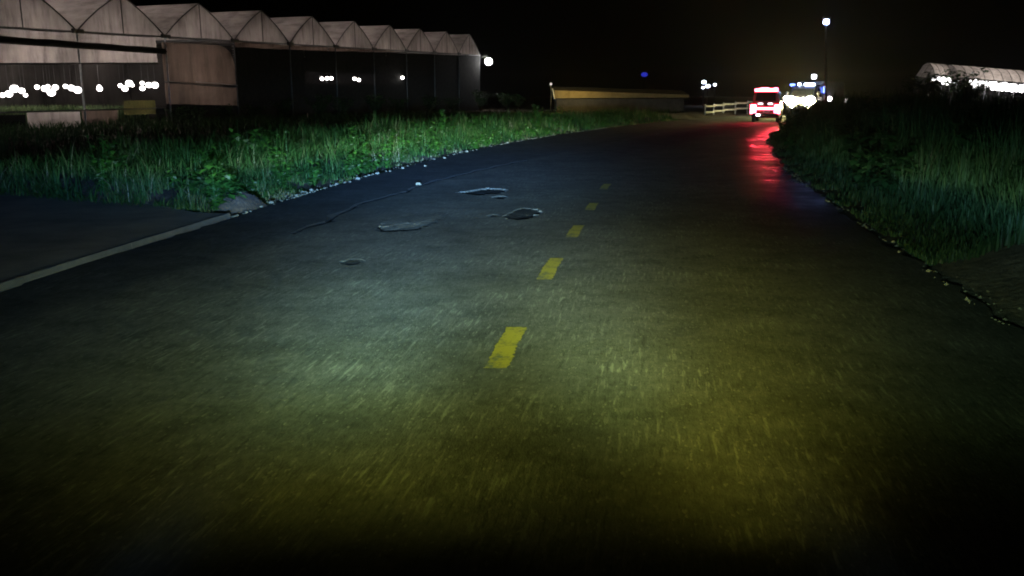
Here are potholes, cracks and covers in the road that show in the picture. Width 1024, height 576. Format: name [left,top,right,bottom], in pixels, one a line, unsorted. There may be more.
pothole [503,208,543,220]
pothole [375,212,454,232]
crack [290,160,528,234]
